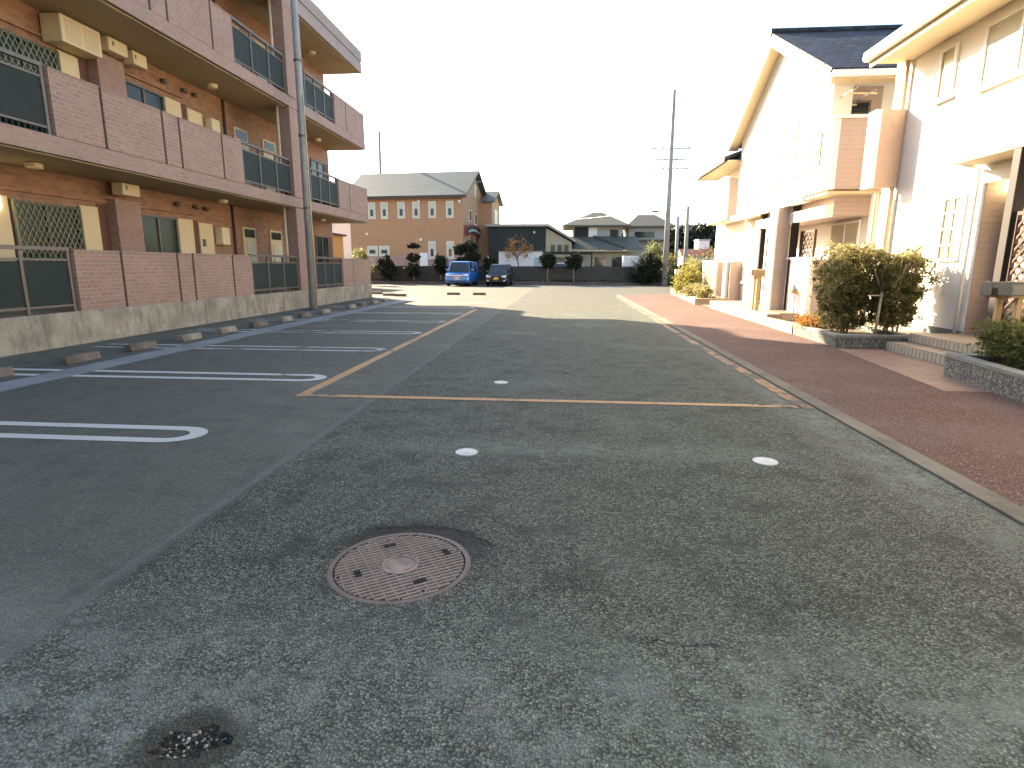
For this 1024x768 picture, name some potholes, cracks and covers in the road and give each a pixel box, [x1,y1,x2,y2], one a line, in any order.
crack [619,634,747,651]
pothole [147,723,233,761]
manhole cover [327,533,471,604]
